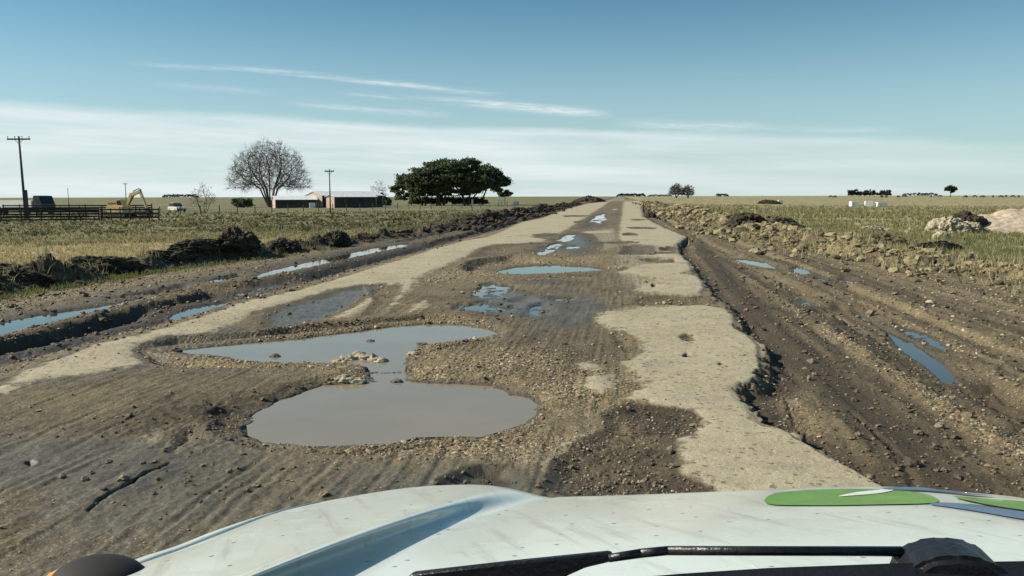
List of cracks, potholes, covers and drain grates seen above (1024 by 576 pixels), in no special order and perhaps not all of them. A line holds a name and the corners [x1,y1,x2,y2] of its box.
pothole [577,213,607,228]
pothole [257,285,372,332]
pothole [215,373,550,457]
pothole [134,313,505,382]
pothole [458,253,616,279]
pothole [534,403,717,497]
pothole [535,232,604,262]
pothole [455,285,581,319]
